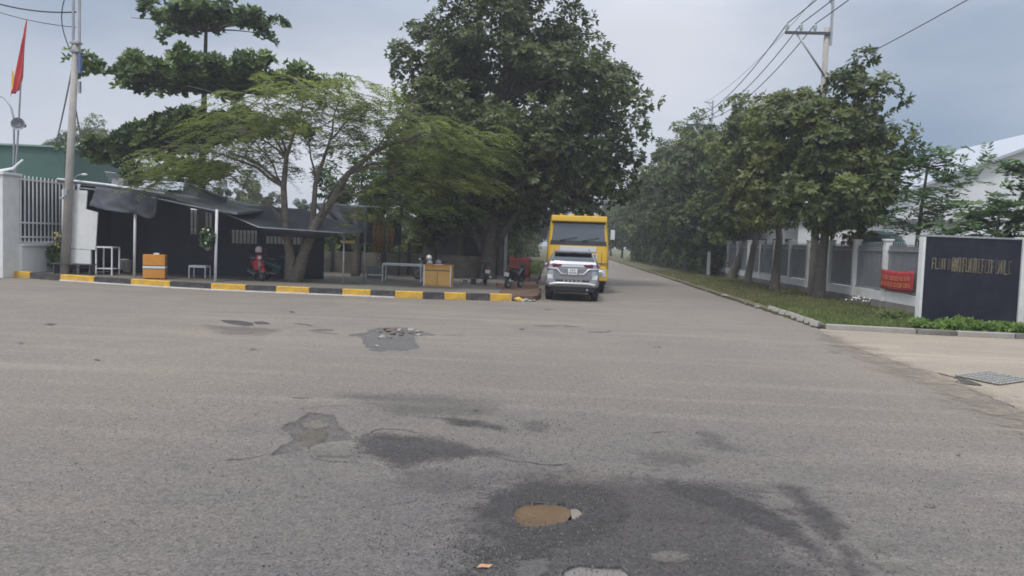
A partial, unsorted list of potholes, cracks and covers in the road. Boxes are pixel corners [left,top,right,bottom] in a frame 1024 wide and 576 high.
drain grate [955,371,1024,385]
pothole [270,412,352,456]
pothole [348,327,436,352]
